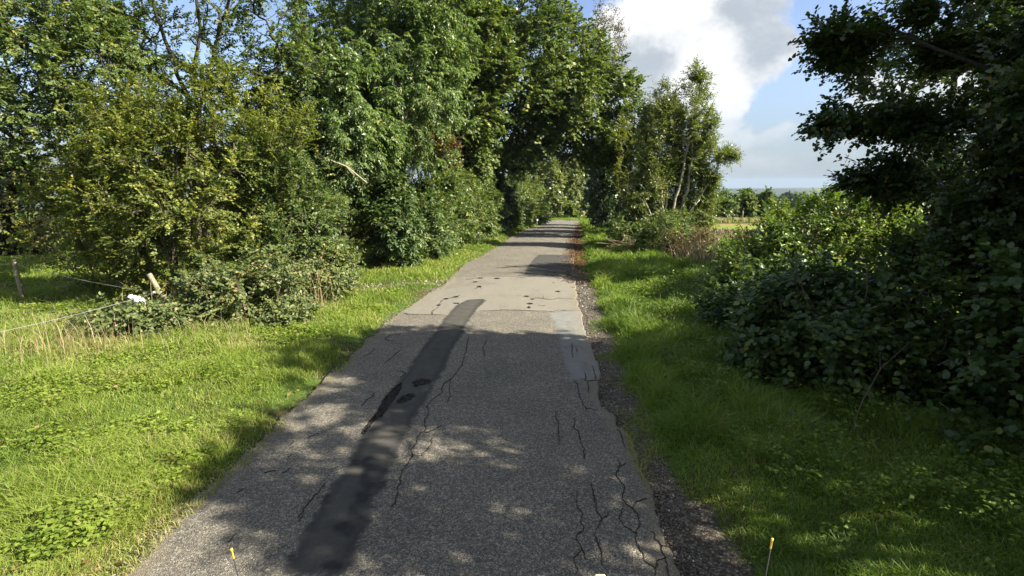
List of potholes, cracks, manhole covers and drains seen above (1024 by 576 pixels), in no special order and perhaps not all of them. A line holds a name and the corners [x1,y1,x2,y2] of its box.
crack [573,429,669,576]
crack [555,343,601,460]
pothole [411,378,432,387]
pothole [361,382,401,434]
crack [391,337,486,506]
